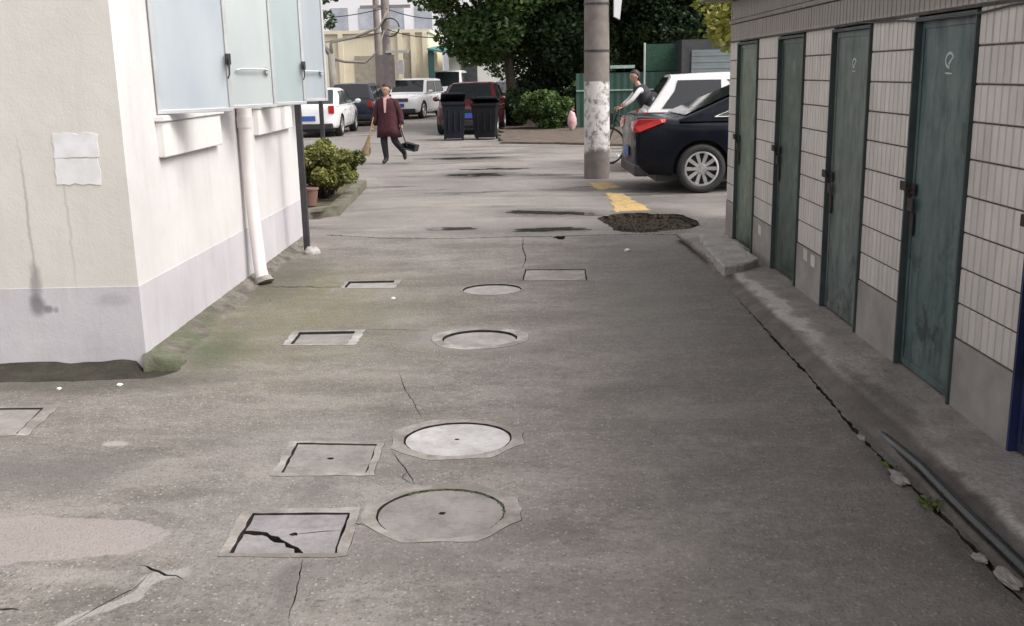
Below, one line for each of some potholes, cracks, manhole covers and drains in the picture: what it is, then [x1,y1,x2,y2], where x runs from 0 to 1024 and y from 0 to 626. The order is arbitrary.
manhole cover [341,280,402,288]
manhole cover [0,405,60,436]
manhole cover [460,283,524,295]
manhole cover [218,507,360,558]
manhole cover [361,483,522,543]
manhole cover [519,269,590,281]
manhole cover [270,440,385,477]
manhole cover [431,327,529,350]
manhole cover [390,420,525,460]
crack [74,565,182,621]
pothole [597,213,699,233]
